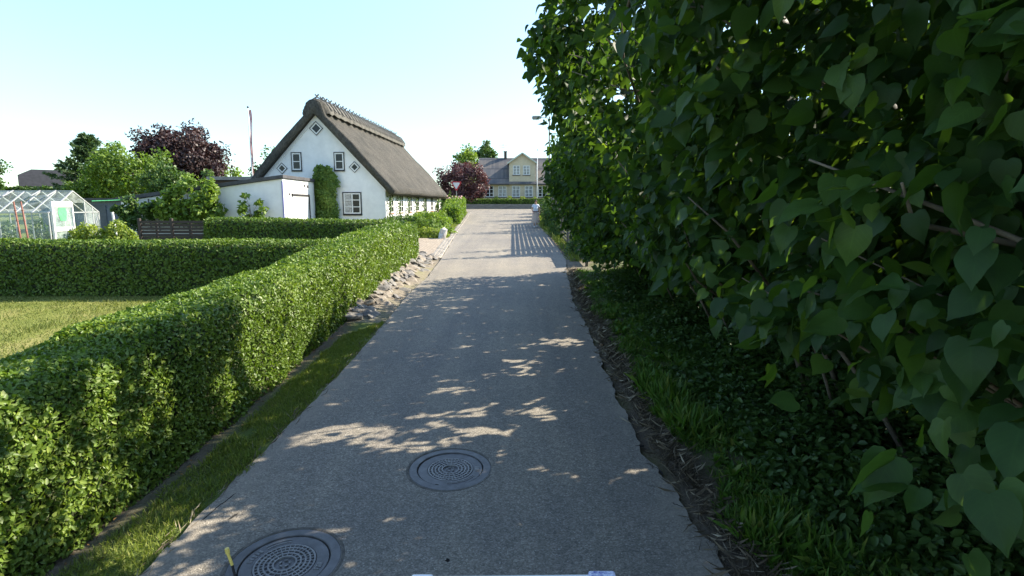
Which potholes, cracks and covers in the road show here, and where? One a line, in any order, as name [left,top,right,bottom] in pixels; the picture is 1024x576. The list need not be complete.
manhole cover [406,448,491,492]
manhole cover [220,527,345,576]
